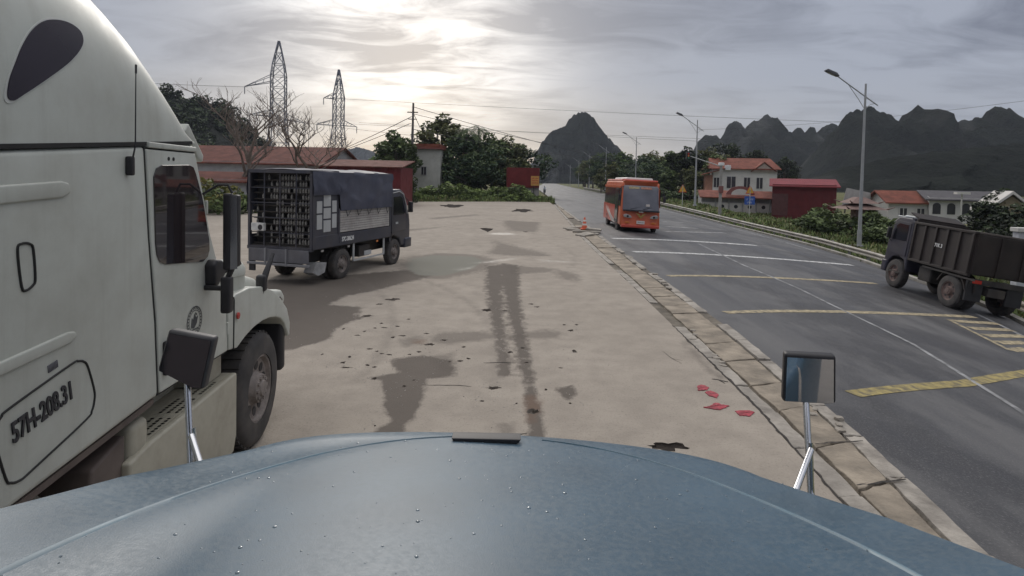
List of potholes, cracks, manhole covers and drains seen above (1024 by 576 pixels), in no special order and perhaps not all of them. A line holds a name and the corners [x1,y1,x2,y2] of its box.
pothole [647,442,689,451]
